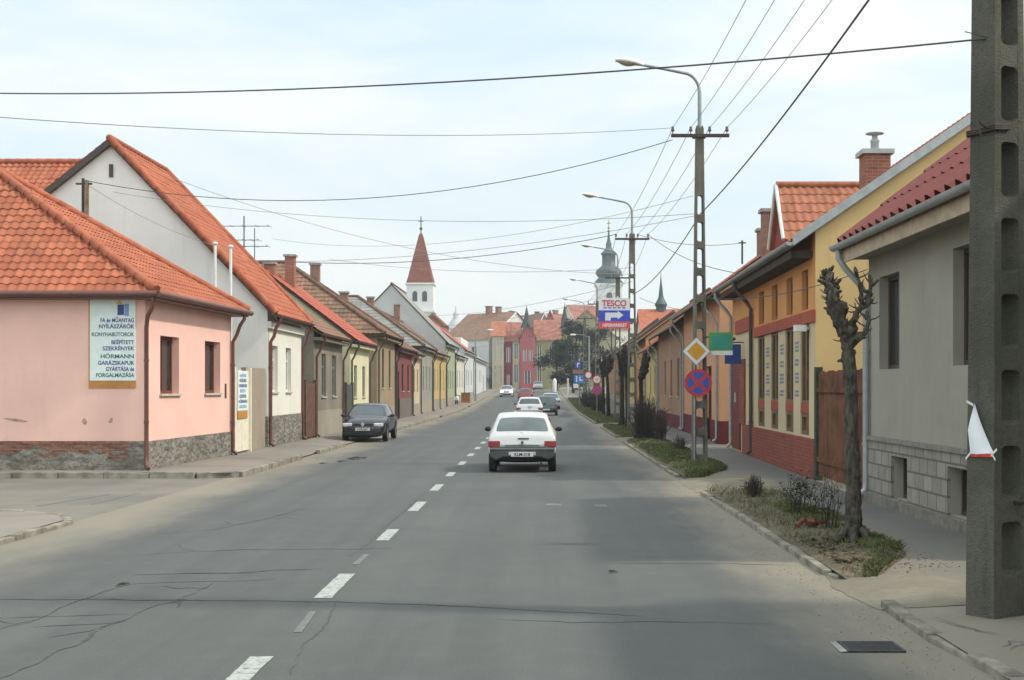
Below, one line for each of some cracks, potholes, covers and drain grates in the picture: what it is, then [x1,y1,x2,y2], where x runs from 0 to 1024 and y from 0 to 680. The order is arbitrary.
drain grate [830,641,906,653]
crack [0,568,763,678]
